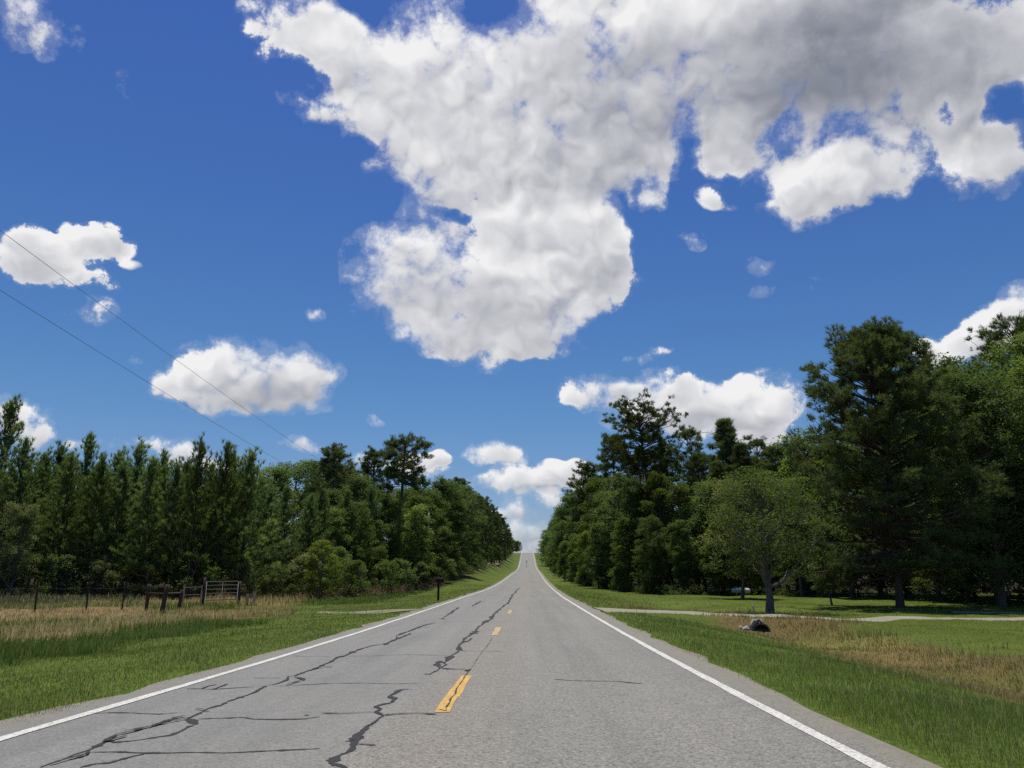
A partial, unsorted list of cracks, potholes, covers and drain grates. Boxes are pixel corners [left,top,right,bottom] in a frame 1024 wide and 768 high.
crack [81,589,518,768]
